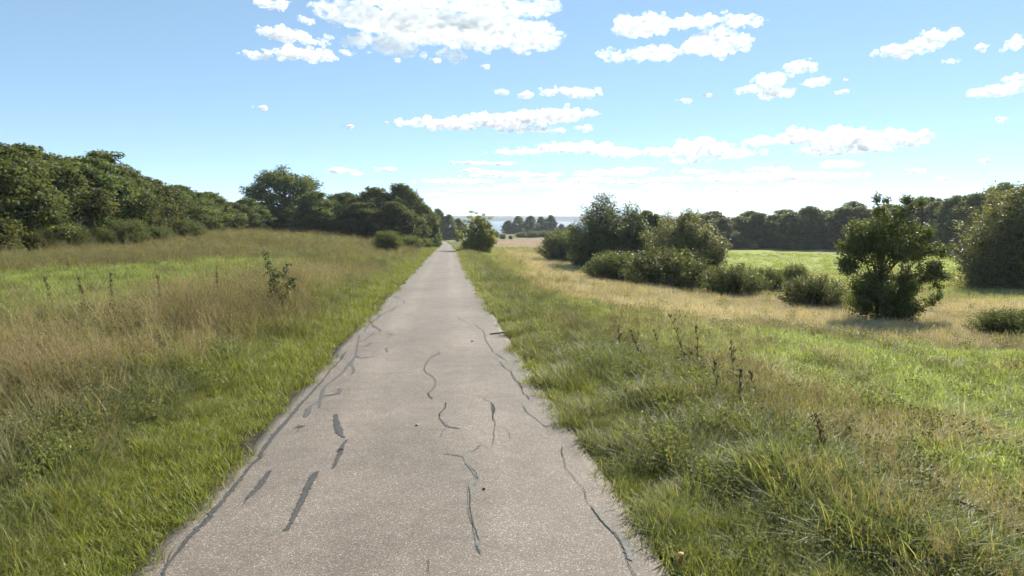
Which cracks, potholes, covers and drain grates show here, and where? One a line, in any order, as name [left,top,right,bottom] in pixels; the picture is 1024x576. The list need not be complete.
crack [561,445,636,575]
crack [472,400,547,451]
crack [364,296,405,336]
crack [424,350,457,437]
